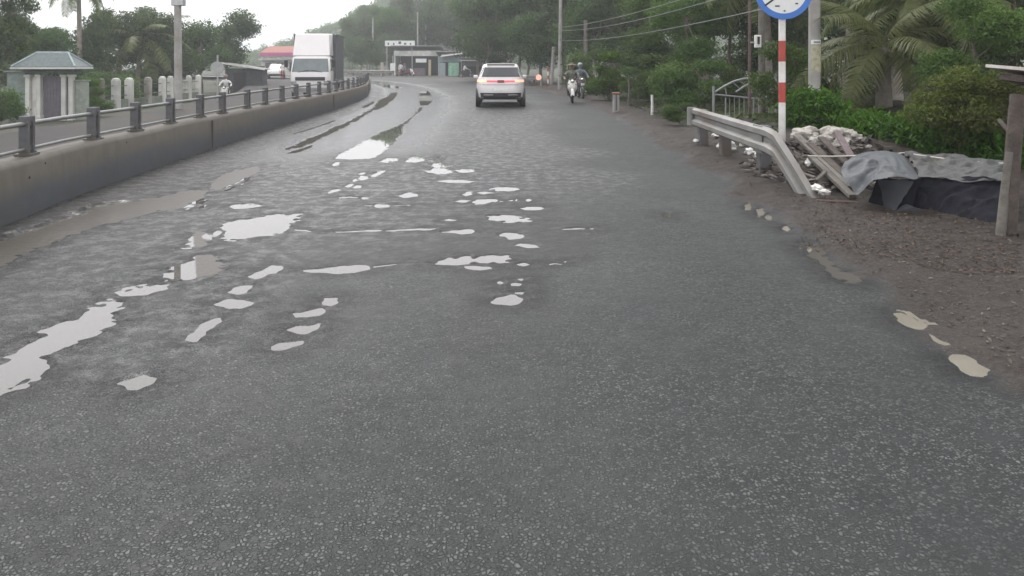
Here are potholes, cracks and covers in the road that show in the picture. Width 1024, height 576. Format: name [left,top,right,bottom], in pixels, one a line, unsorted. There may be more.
pothole [0,189,215,270]
pothole [427,253,525,267]
pothole [482,213,543,224]
pothole [480,294,530,308]
pothole [175,312,232,345]
pothole [153,252,235,284]
pothole [330,105,425,160]
pothole [934,345,1005,382]
pothole [105,369,169,395]
pothole [0,297,137,402]
pothole [882,309,940,334]
pothole [282,92,399,150]
